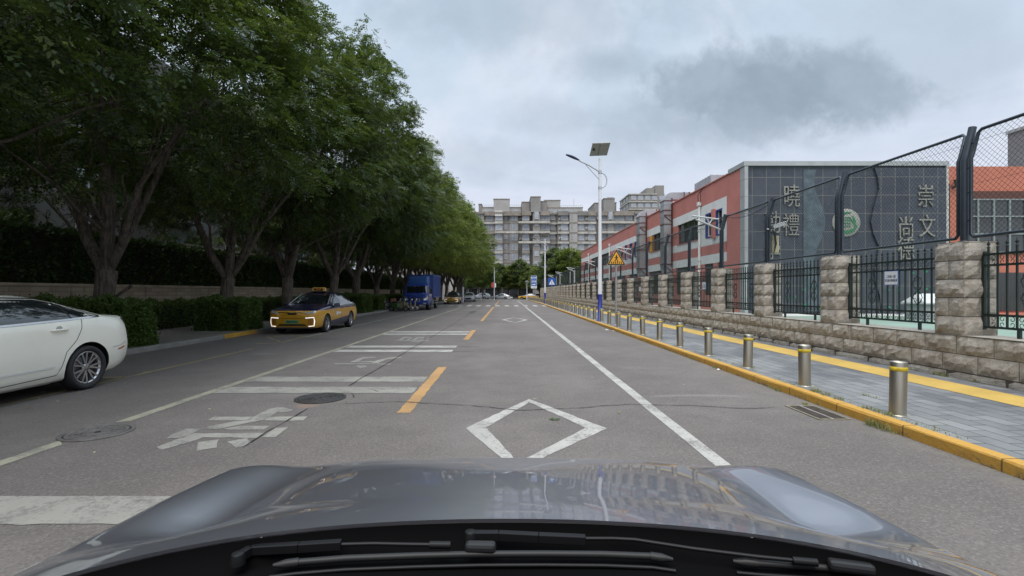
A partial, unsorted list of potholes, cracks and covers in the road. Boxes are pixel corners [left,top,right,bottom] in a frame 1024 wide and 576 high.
crack [342,389,775,410]
manhole cover [56,423,136,442]
manhole cover [294,392,346,404]
drain grate [785,405,851,420]
